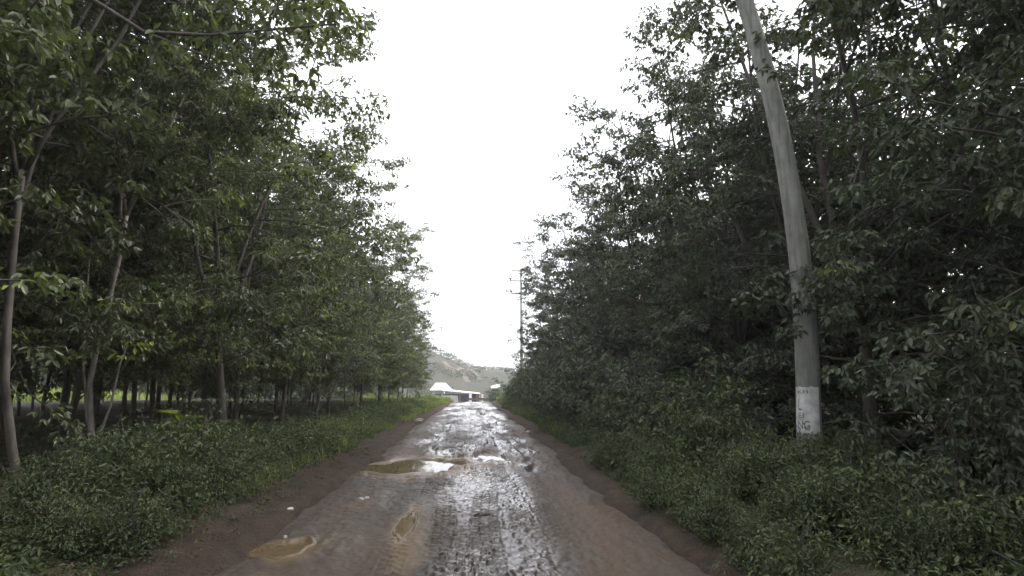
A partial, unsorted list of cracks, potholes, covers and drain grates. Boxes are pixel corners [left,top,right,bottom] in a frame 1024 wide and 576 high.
pothole [245,536,316,560]
pothole [358,457,492,476]
pothole [392,509,418,541]
